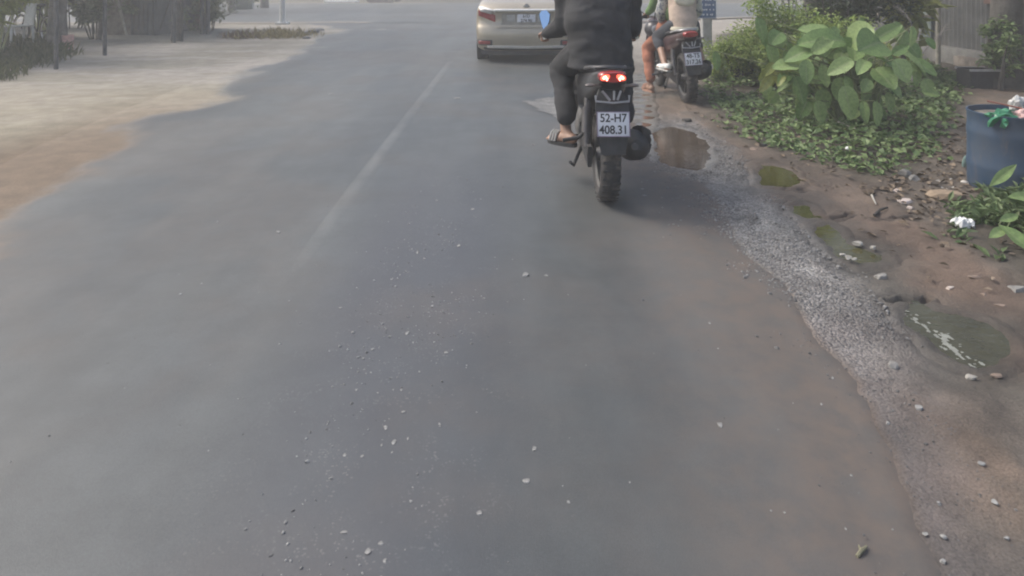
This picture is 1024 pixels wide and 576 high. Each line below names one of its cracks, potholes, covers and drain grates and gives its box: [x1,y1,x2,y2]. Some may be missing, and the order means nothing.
pothole [743,161,816,191]
pothole [648,124,722,175]
pothole [886,292,1024,383]
pothole [797,220,904,274]
